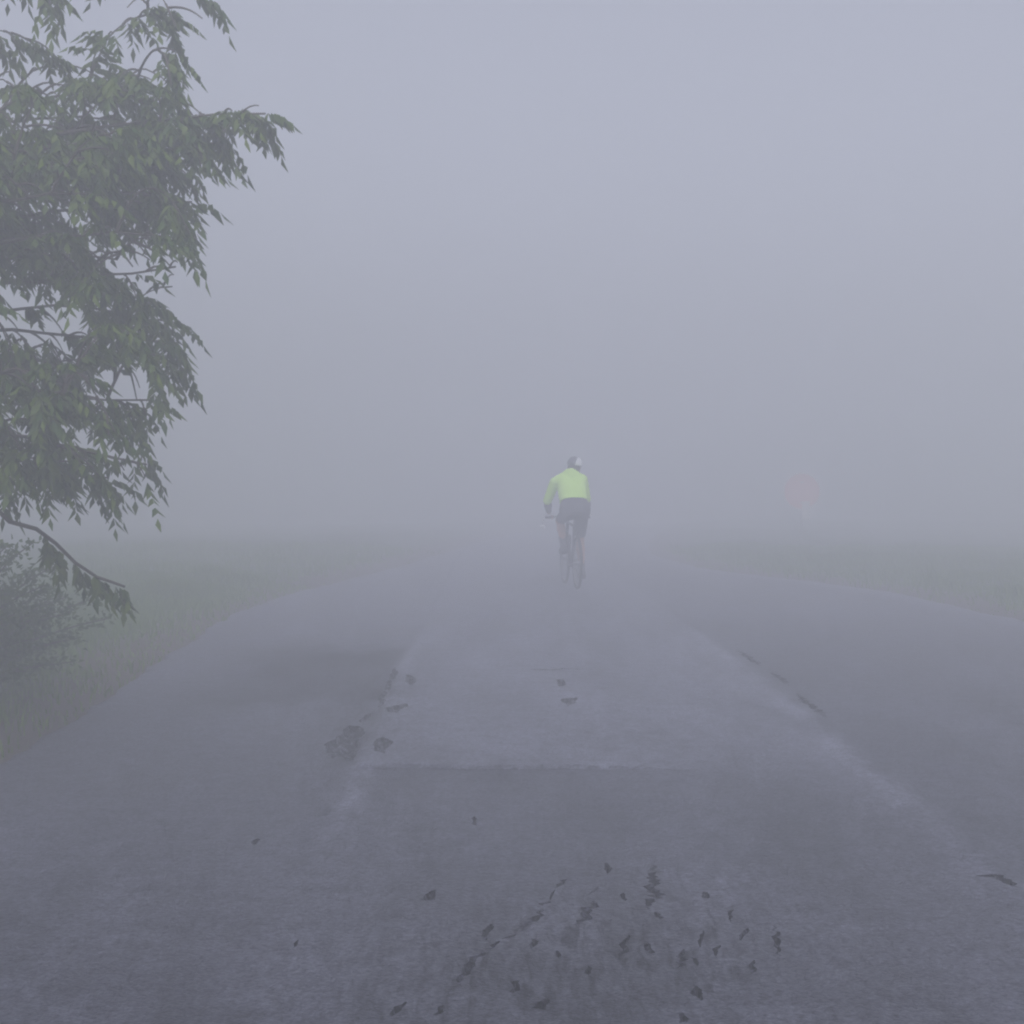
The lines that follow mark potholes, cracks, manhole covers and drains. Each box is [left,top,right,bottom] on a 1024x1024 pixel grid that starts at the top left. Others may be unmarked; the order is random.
pothole [324,725,365,762]
crack [976,874,1021,888]
crack [456,879,601,985]
crack [643,865,666,919]
